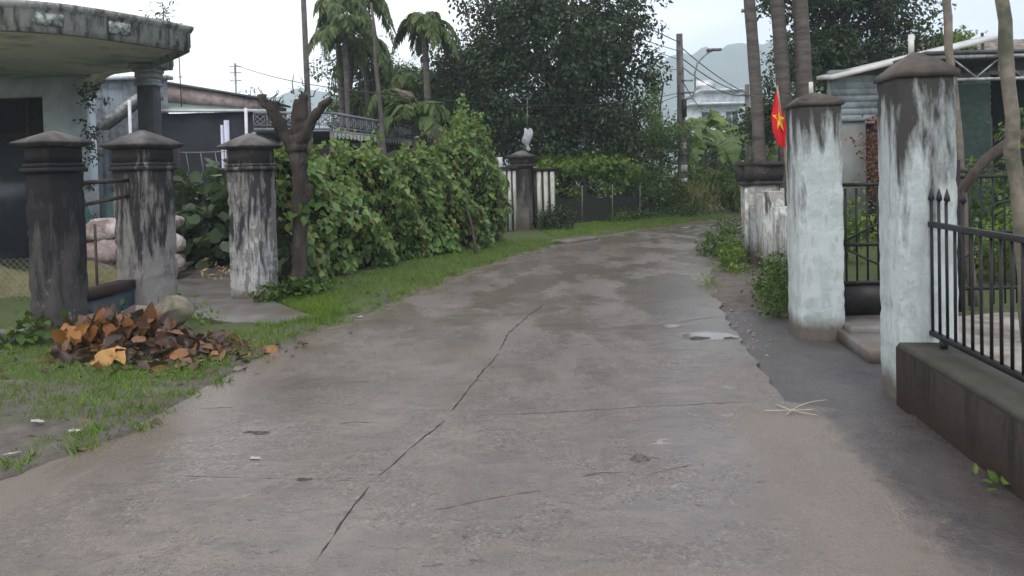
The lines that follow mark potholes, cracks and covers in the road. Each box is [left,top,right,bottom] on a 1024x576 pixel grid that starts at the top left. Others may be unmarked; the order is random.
crack [437,491,537,510]
pothole [630,454,650,463]
